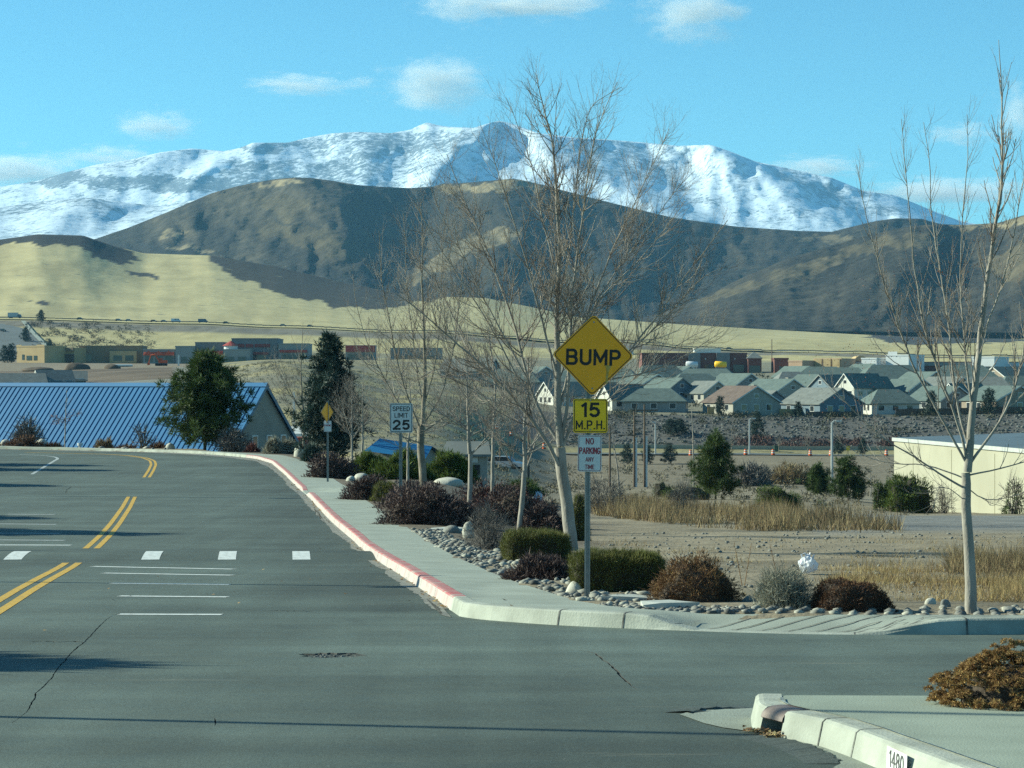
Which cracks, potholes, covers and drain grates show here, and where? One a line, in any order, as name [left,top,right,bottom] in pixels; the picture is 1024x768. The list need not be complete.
crack [12,617,110,723]
crack [580,650,636,689]
